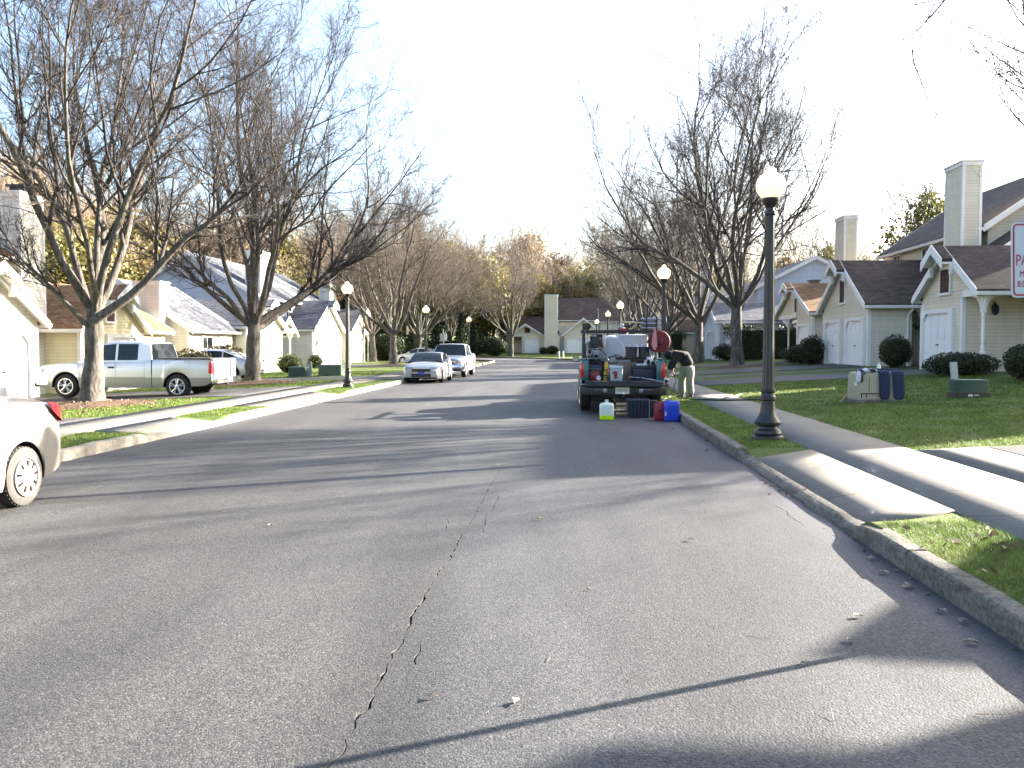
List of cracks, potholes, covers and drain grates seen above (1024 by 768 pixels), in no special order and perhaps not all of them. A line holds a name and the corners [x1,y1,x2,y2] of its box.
crack [327,469,500,768]
